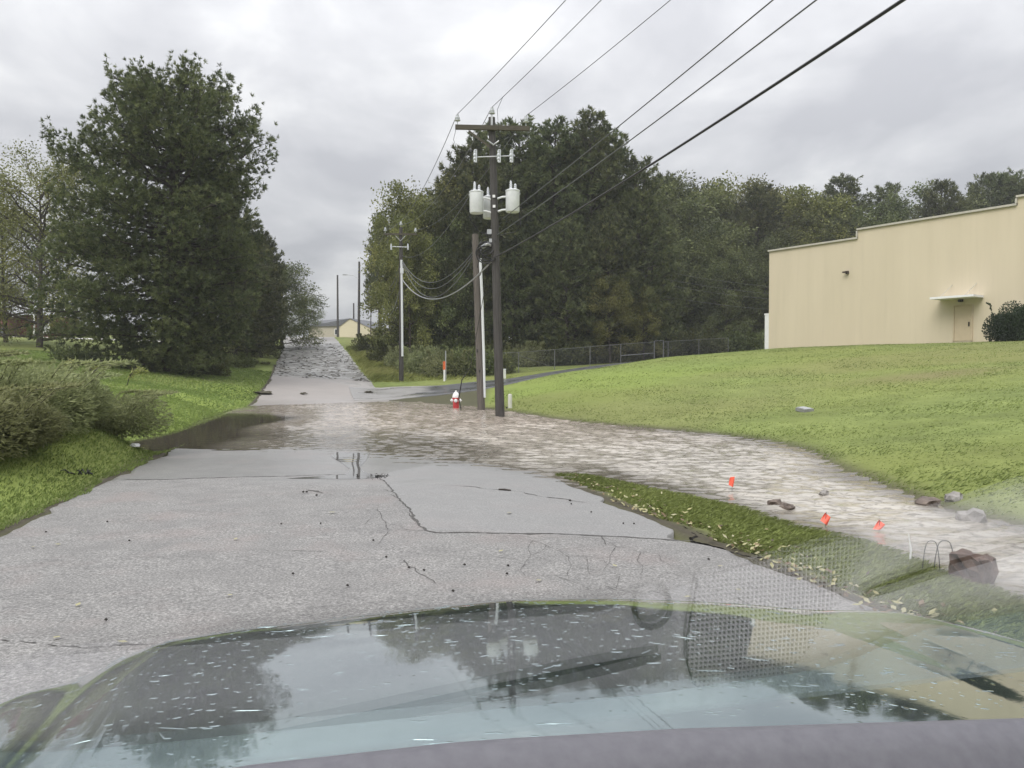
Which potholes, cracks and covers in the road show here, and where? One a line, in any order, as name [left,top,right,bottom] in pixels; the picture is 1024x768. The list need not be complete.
crack [362,478,692,591]
crack [1,639,153,648]
